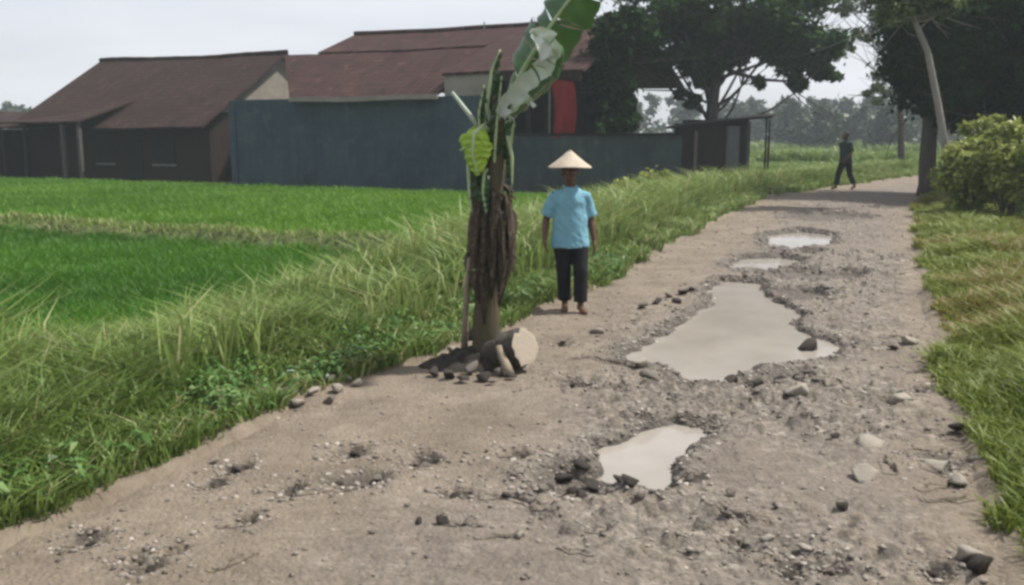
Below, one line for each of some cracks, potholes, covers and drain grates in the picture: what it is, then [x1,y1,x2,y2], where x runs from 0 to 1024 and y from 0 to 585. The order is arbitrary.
pothole [122,554,165,574]
pothole [64,525,125,549]
pothole [577,411,718,490]
pothole [219,459,255,475]
pothole [195,477,232,490]
pothole [330,445,372,459]
pothole [268,479,311,498]
pothole [323,465,395,493]
pothole [720,251,810,271]
pothole [758,227,838,249]
pothole [615,275,852,382]
